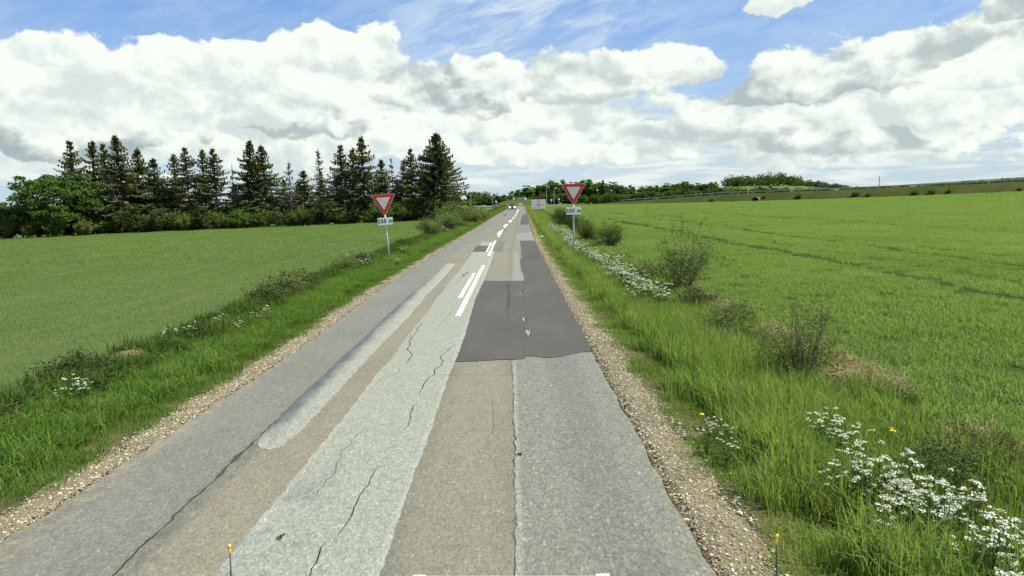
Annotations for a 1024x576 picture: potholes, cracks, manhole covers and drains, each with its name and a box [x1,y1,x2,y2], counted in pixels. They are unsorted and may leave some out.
crack [309,344,475,576]
